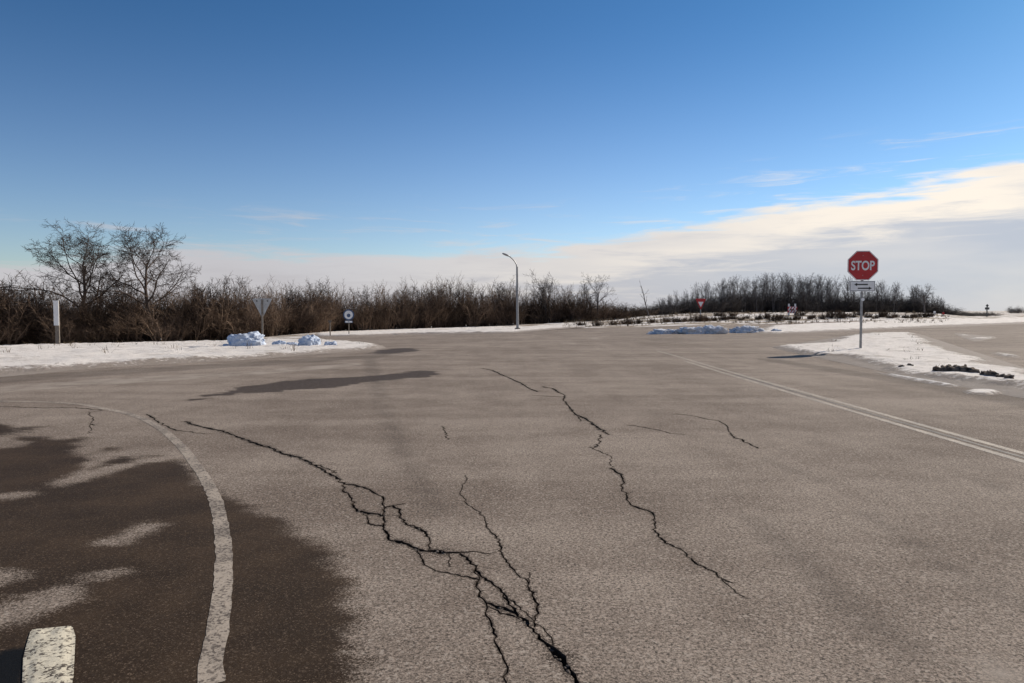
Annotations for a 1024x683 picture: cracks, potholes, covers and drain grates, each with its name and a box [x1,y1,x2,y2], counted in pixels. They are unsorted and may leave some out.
crack [146,414,579,683]
crack [483,368,743,597]
